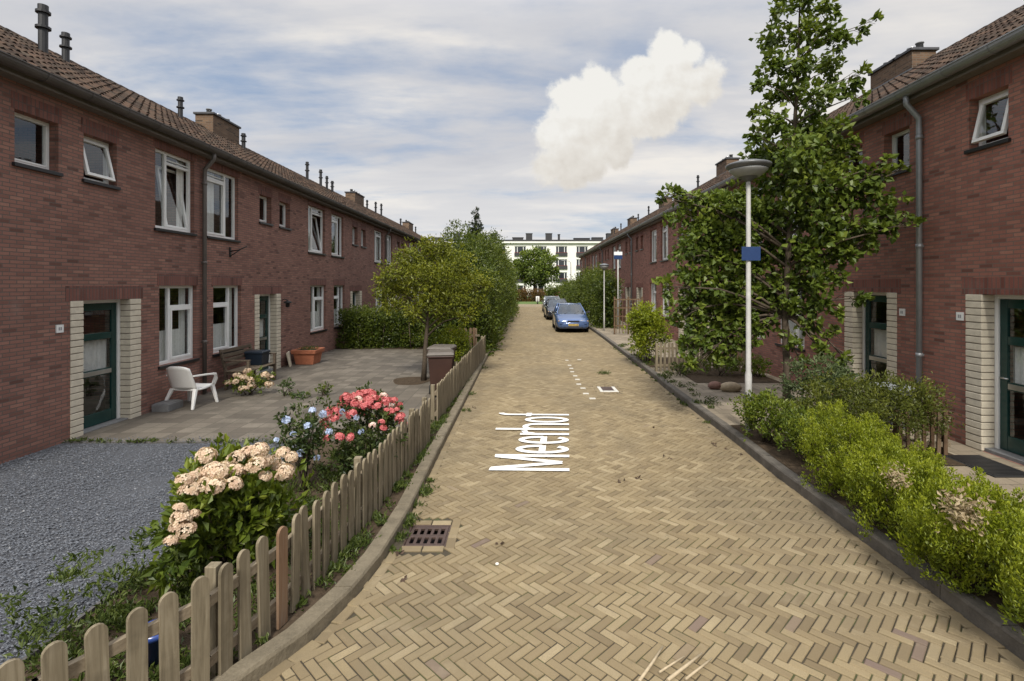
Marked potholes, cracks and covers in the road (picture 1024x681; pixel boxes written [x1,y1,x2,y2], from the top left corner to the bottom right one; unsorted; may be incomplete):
drain grate [402,525,451,547]
